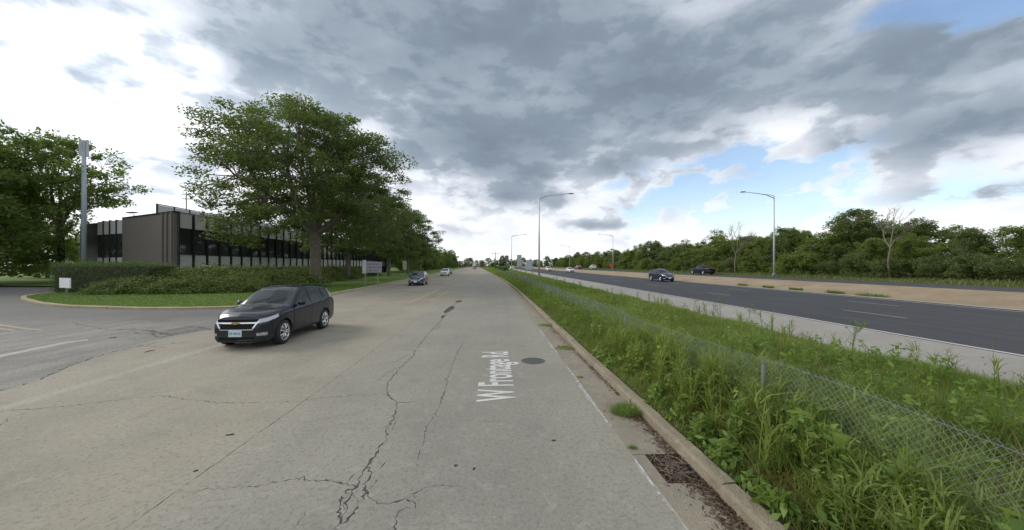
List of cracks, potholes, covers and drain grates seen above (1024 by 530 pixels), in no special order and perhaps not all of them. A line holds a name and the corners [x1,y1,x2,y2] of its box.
crack [0,298,463,530]
